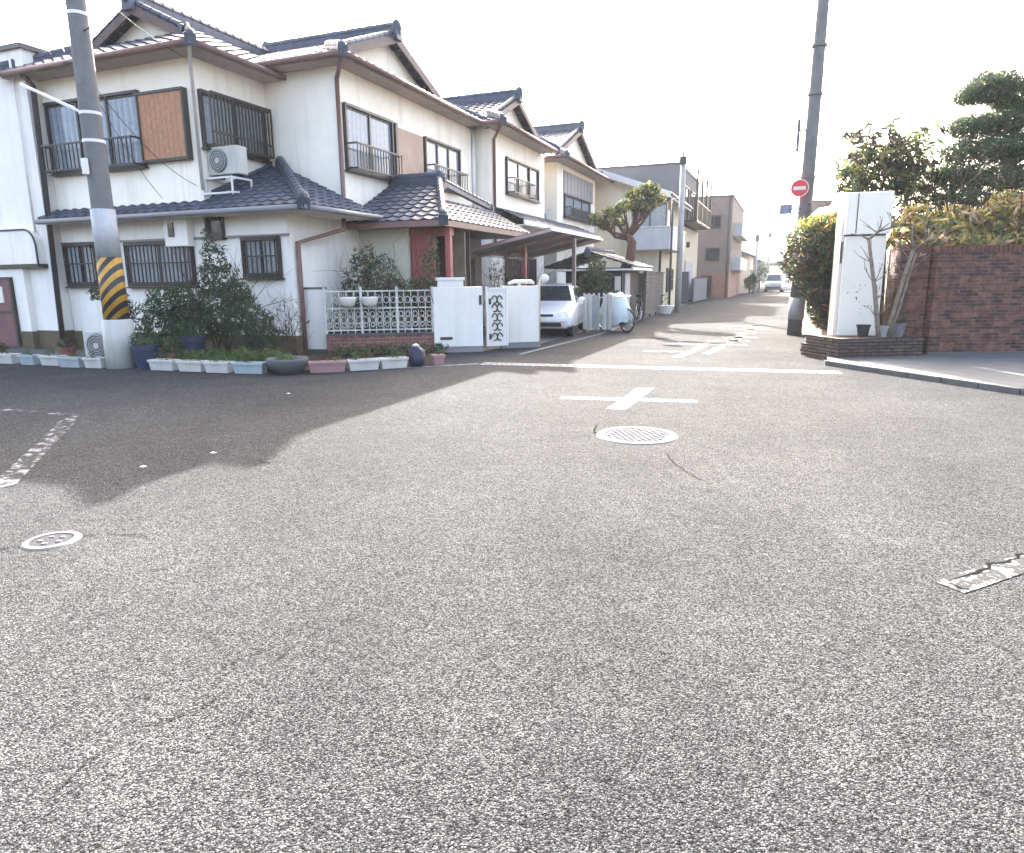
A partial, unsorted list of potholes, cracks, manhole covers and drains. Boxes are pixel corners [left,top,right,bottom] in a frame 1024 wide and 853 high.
manhole cover [20,531,82,551]
manhole cover [596,426,678,445]
